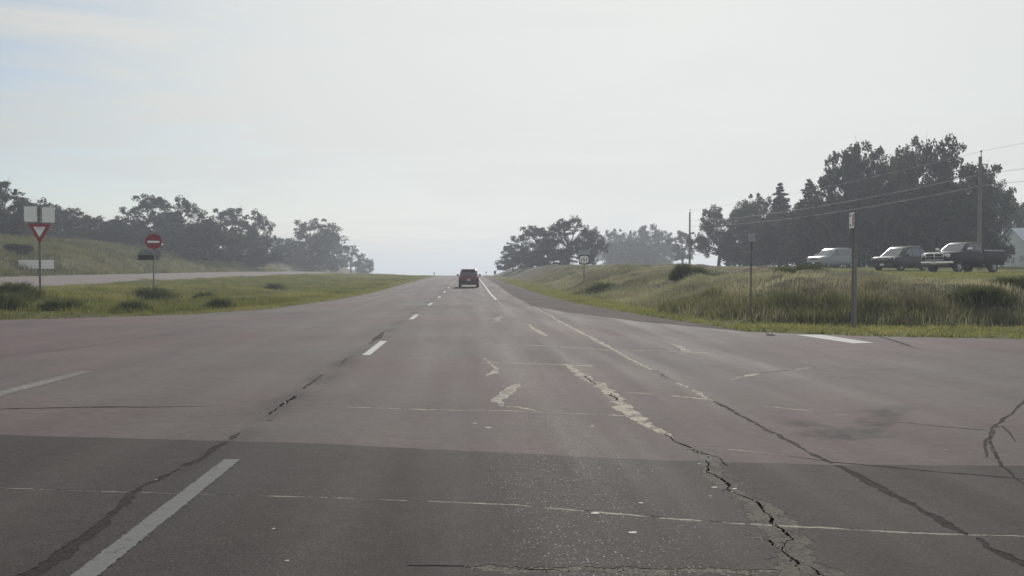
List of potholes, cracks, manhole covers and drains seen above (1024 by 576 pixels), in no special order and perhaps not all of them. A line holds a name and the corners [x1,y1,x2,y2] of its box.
crack [0,316,1024,576]
